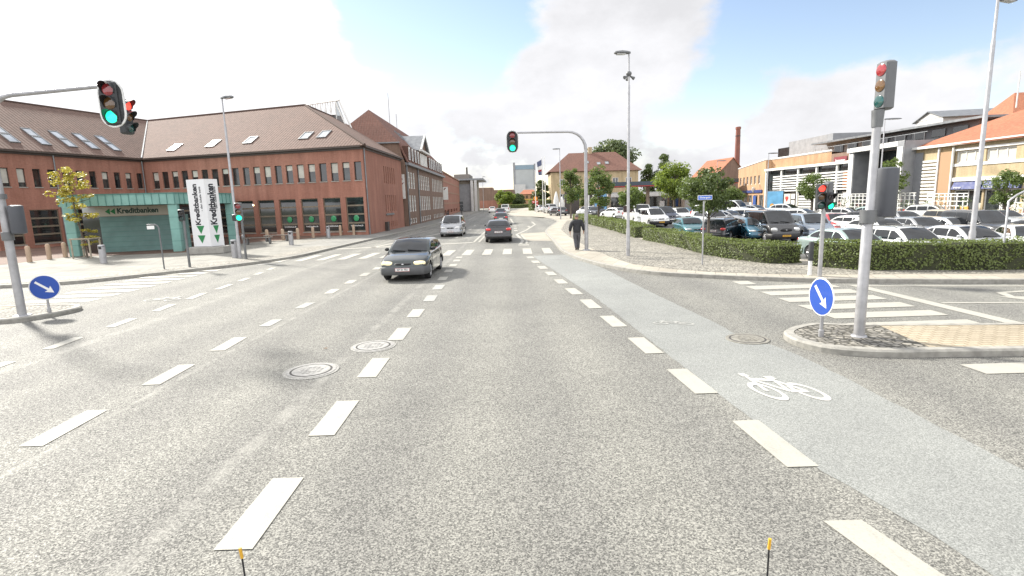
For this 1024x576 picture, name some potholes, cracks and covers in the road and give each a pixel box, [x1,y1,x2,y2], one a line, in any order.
manhole cover [726,333,770,345]
manhole cover [350,340,396,353]
manhole cover [282,362,339,380]
